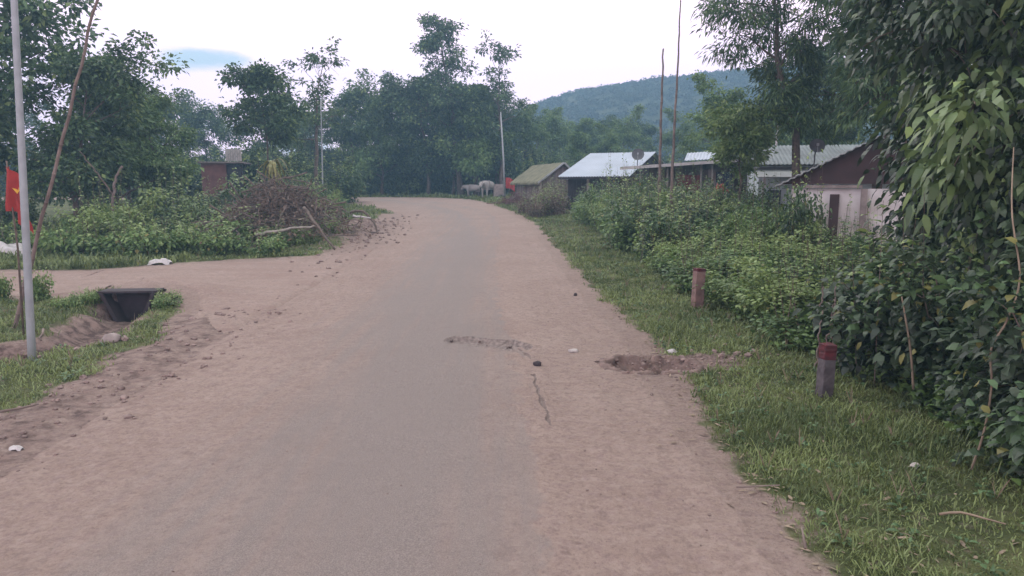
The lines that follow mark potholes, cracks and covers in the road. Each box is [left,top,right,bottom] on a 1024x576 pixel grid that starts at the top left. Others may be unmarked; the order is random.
crack [512,347,558,428]
pothole [438,335,538,354]
